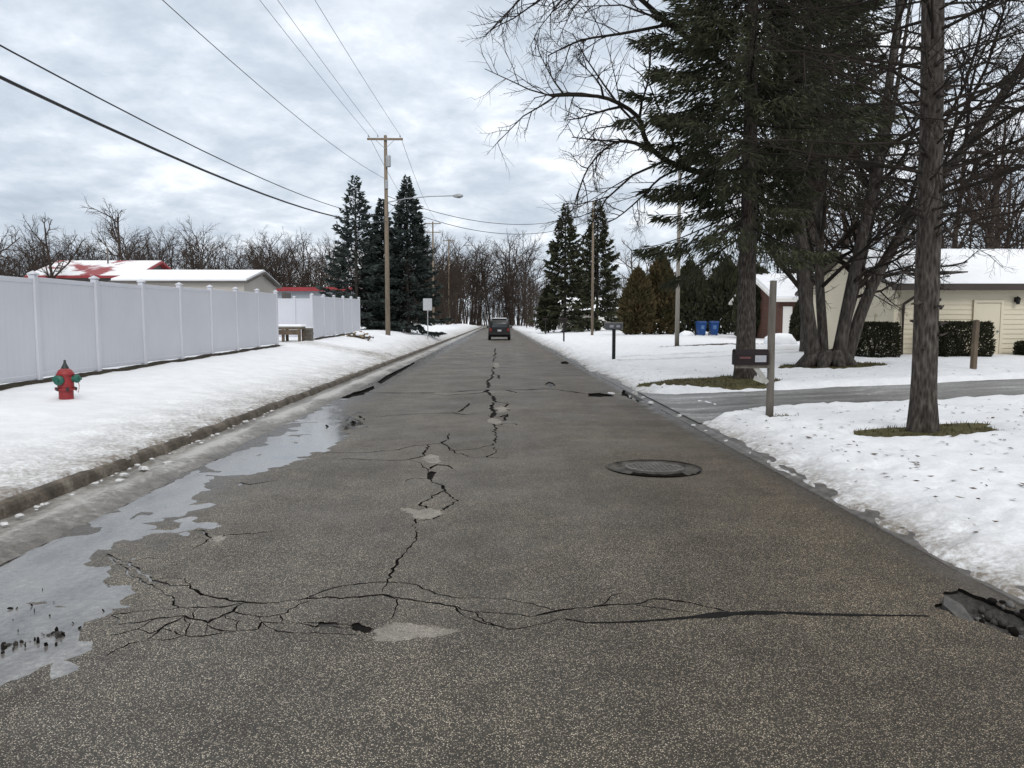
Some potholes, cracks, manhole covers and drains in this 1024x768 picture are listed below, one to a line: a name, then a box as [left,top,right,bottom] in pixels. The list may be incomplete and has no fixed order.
pothole [351,622,372,633]
pothole [934,588,1024,636]
manhole cover [606,460,703,478]
crack [106,348,729,656]
